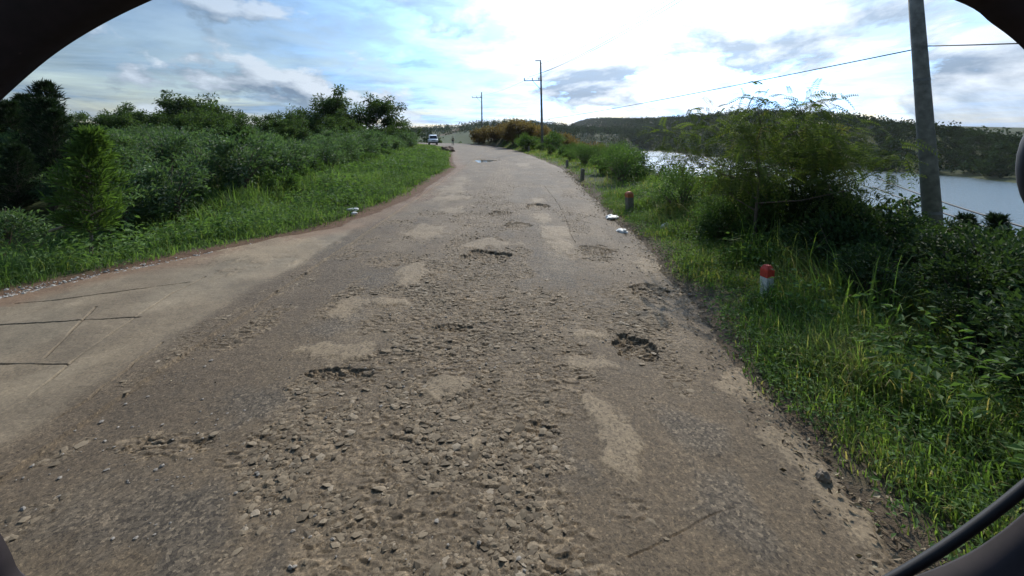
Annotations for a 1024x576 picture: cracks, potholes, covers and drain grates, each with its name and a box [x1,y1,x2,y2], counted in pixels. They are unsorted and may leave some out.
pothole [300,364,376,383]
pothole [524,202,552,210]
pothole [624,282,674,301]
pothole [499,222,533,231]
pothole [428,322,479,334]
pothole [609,331,670,365]
pothole [457,248,513,265]
crack [626,506,737,558]
